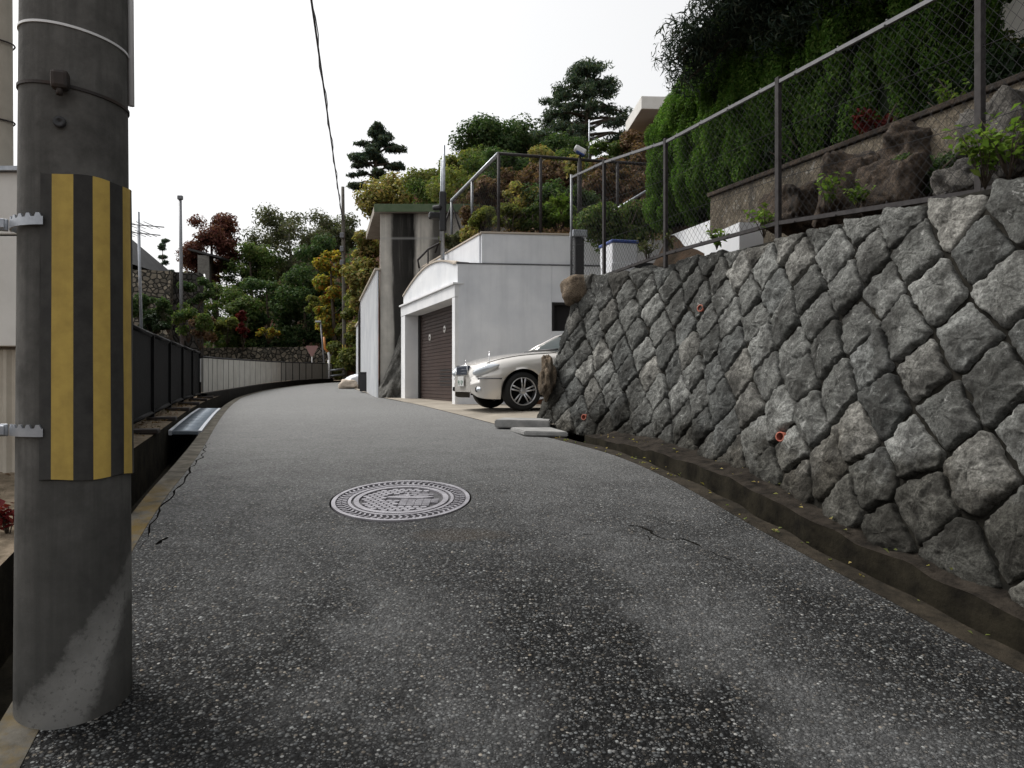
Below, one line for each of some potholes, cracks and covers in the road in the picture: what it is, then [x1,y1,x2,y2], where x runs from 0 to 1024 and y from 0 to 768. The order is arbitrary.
crack [579,525,740,564]
manhole cover [329,480,472,523]
crack [138,443,210,551]
